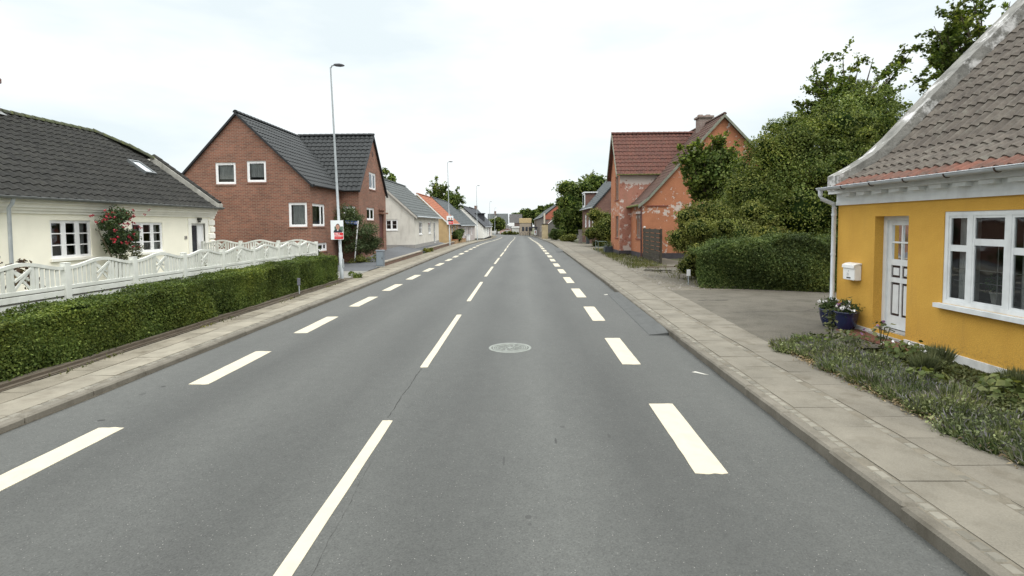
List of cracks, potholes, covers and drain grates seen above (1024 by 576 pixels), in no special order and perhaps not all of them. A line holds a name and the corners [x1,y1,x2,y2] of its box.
manhole cover [489,343,531,353]
